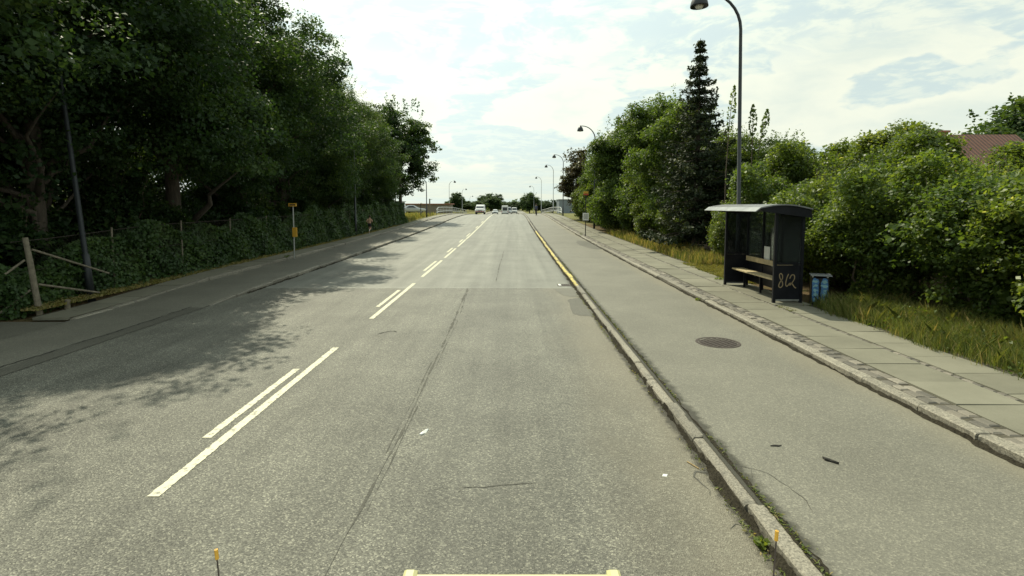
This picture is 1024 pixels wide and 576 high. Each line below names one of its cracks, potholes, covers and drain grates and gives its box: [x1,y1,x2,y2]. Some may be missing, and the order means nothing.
manhole cover [695,337,741,348]
